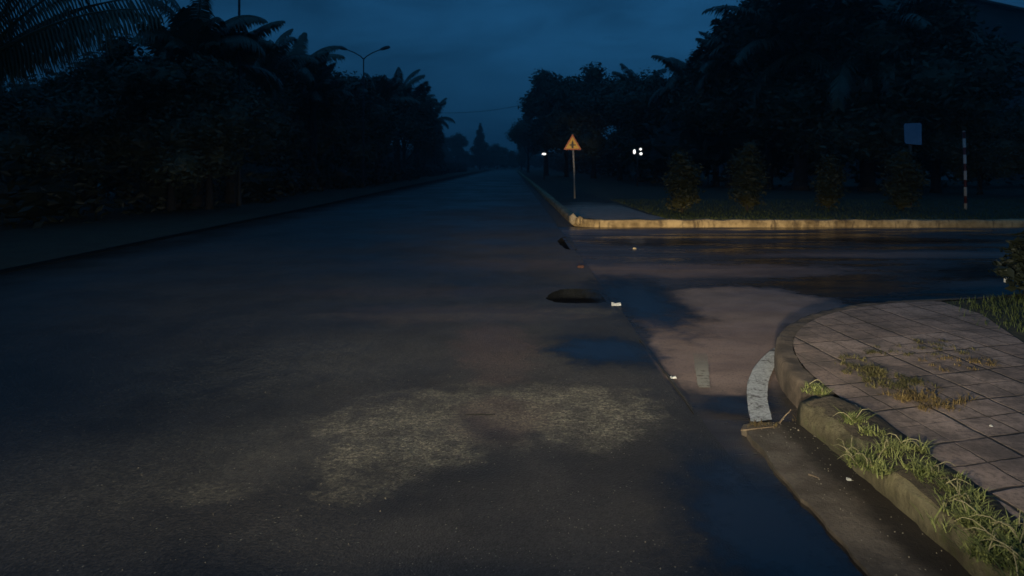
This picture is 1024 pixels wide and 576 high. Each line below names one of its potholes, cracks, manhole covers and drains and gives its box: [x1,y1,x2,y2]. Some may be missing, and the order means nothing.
pothole [546,289,606,303]
